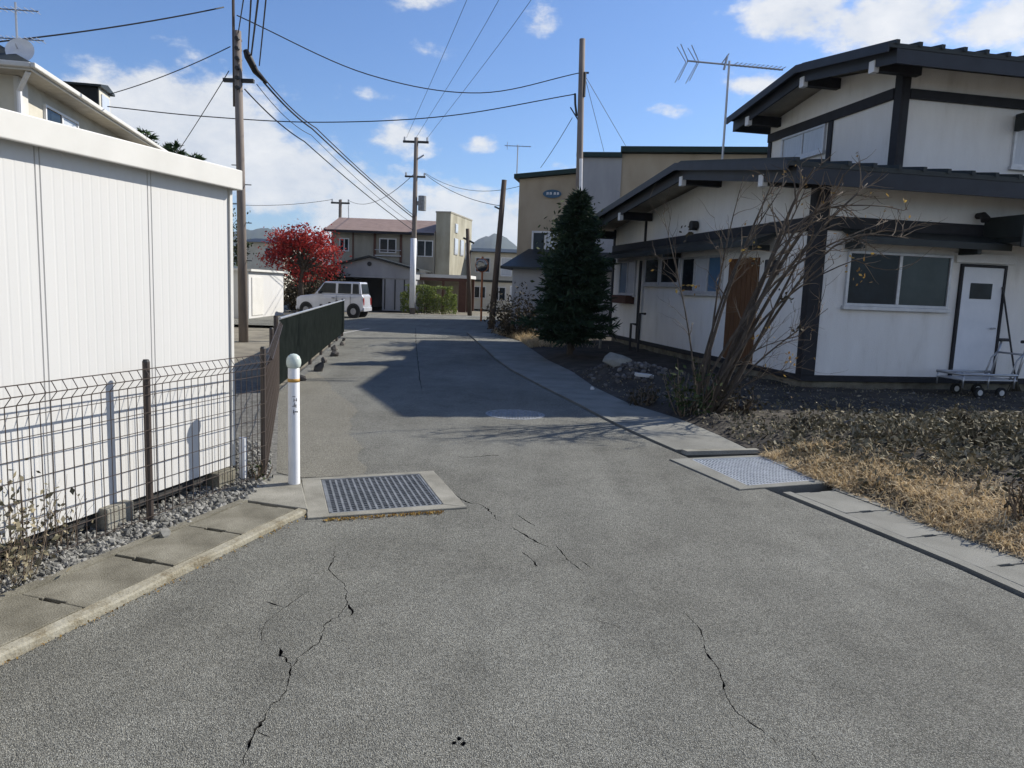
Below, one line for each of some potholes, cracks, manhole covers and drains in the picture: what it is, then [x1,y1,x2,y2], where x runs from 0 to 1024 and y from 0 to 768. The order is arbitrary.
drain grate [669,455,831,496]
drain grate [301,471,467,520]
crack [686,614,776,743]
manhole cover [485,409,545,420]
crack [454,493,591,570]
crack [240,555,354,767]
